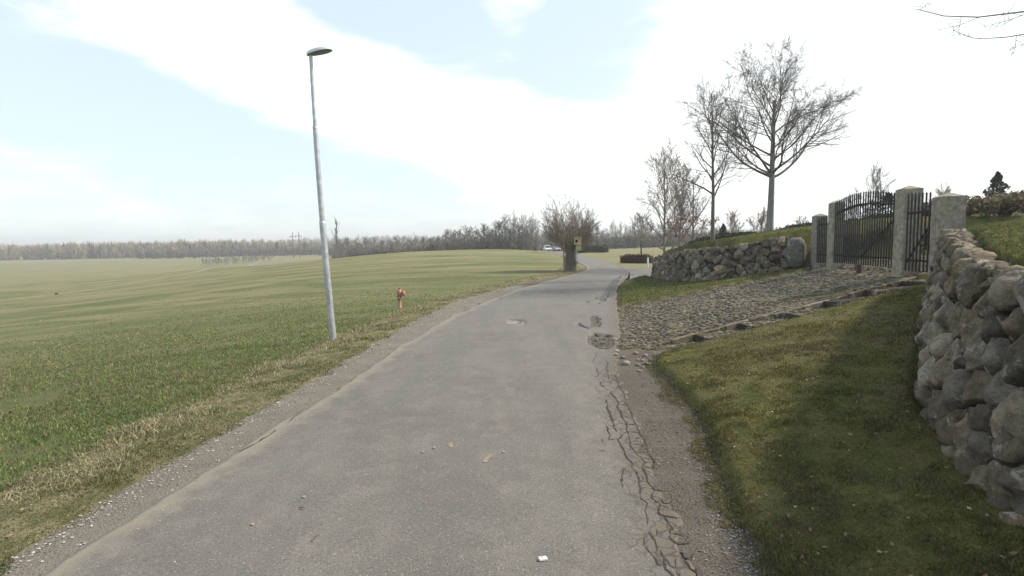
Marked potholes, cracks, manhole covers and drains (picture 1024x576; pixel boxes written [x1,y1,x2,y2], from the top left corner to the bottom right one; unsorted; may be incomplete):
pothole [587,333,615,349]
crack [595,353,697,576]
